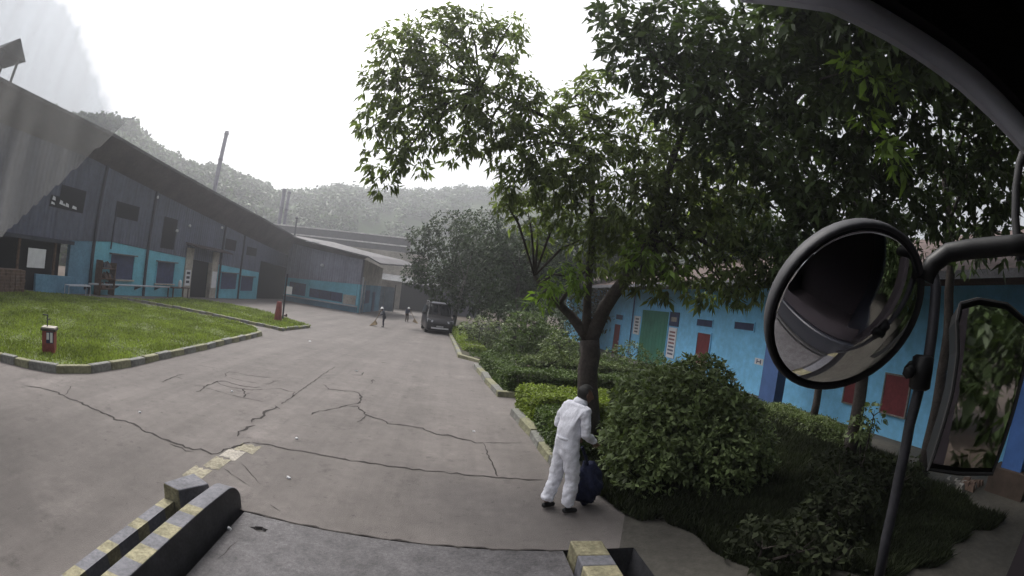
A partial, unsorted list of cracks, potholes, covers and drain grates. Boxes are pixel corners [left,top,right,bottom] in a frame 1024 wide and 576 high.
crack [28,365,539,511]
